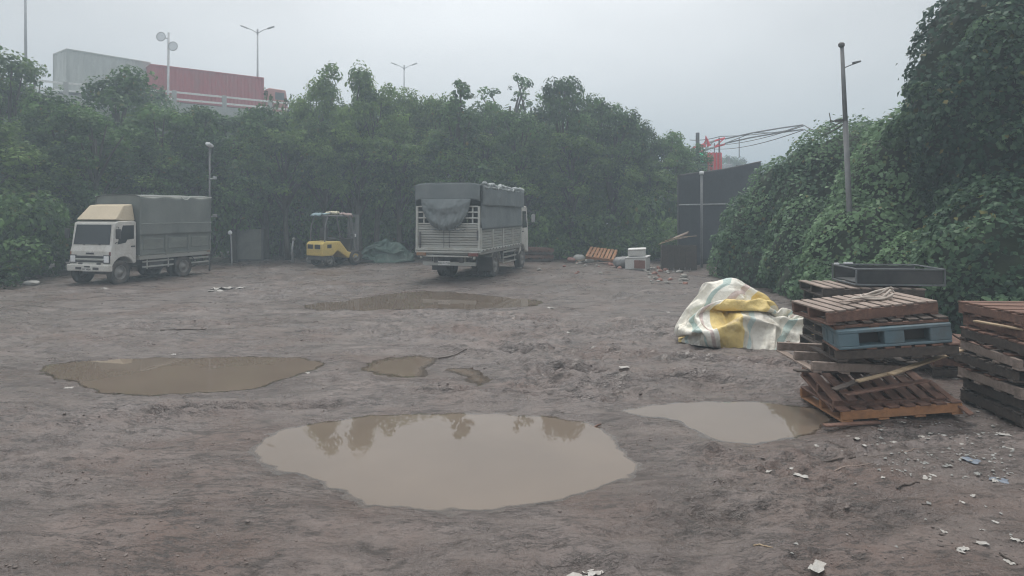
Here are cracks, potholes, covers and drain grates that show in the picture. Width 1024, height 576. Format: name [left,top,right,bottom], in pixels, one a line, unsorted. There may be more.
pothole [603,394,856,450]
pothole [17,352,336,399]
pothole [447,362,505,387]
pothole [347,353,452,380]
pothole [234,407,661,522]
pothole [298,289,552,312]
